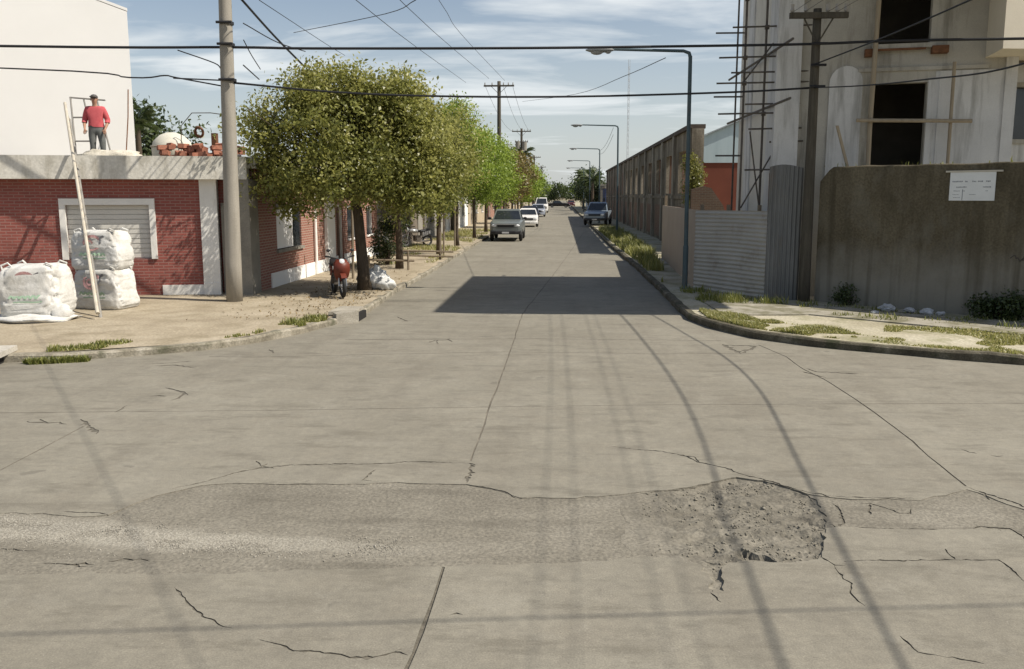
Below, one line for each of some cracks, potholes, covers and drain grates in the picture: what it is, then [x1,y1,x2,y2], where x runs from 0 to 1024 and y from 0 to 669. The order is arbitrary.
crack [822,549,1024,606]
crack [465,463,527,499]
crack [80,419,99,434]
crack [259,639,407,660]
crack [900,636,984,664]
crack [973,526,1024,539]
crack [176,461,450,488]
crack [965,486,1024,507]
crack [175,588,230,628]
pothole [620,477,827,591]
